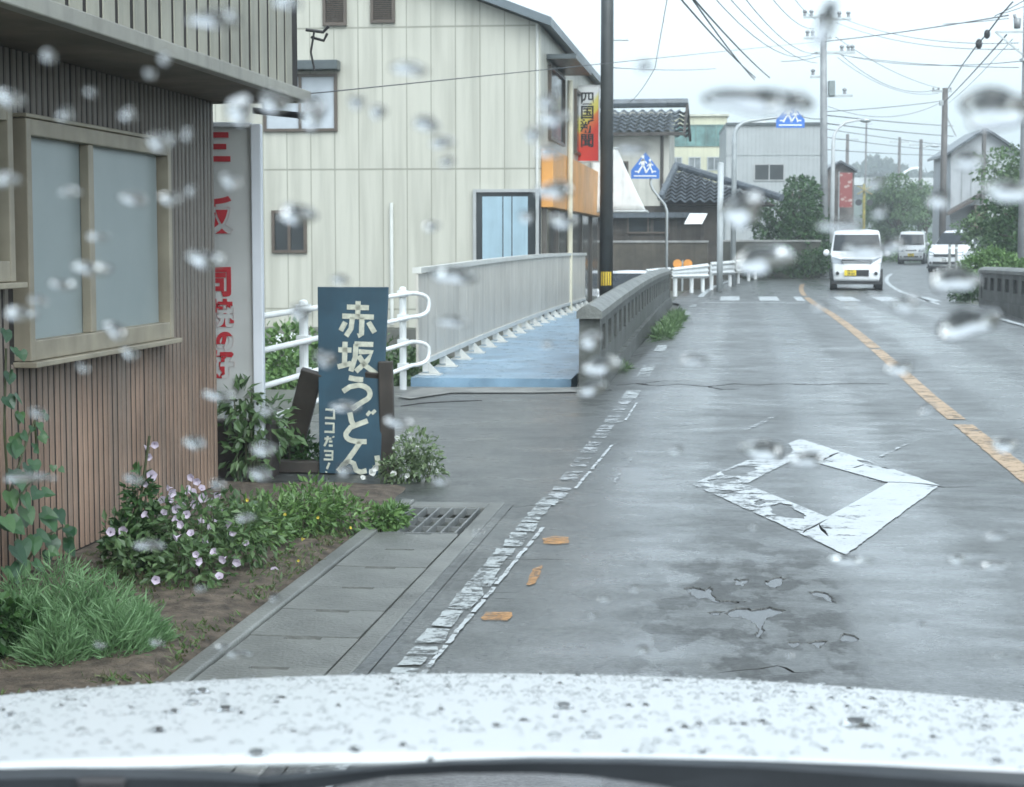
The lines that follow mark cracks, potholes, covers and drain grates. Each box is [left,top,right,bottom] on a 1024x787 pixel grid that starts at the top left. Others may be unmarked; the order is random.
pothole [839,633,859,642]
crack [719,665,804,673]
drain grate [382,507,481,535]
pothole [809,591,836,603]
pothole [725,606,786,639]
crack [618,381,880,390]
pothole [806,640,828,648]
pothole [764,577,787,588]
pothole [684,586,746,604]
